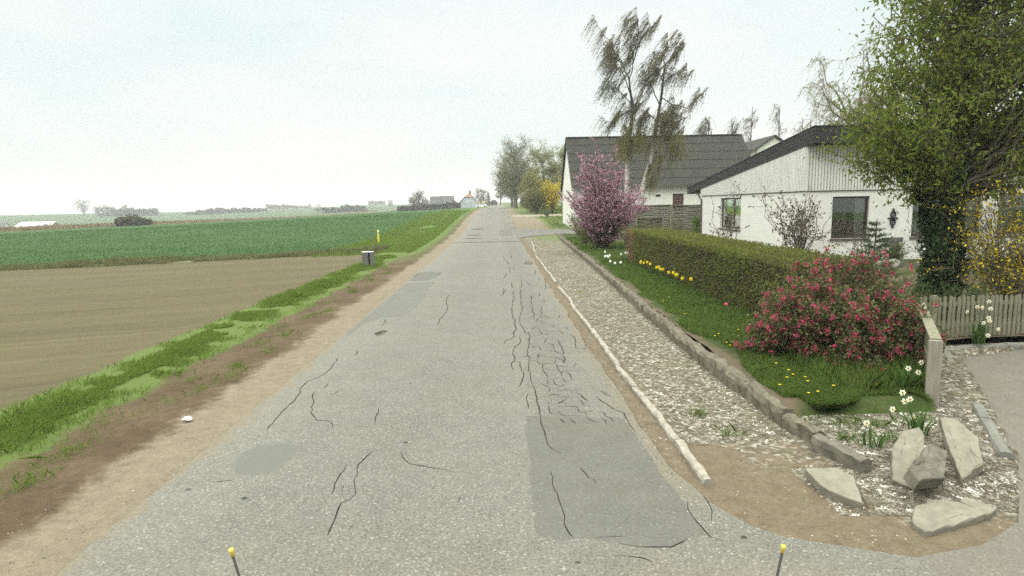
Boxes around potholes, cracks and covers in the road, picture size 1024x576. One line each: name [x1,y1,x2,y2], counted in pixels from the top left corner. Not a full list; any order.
crack [502,256,634,453]
crack [327,451,373,536]
crack [267,351,358,429]
